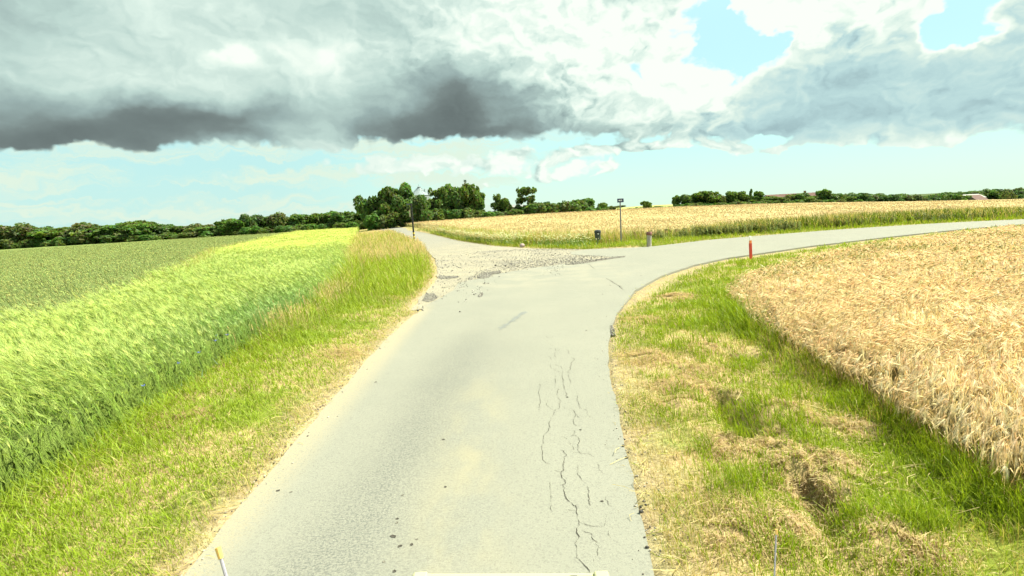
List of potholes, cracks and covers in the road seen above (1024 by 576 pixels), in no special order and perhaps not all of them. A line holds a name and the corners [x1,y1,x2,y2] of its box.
crack [538,349,610,572]
